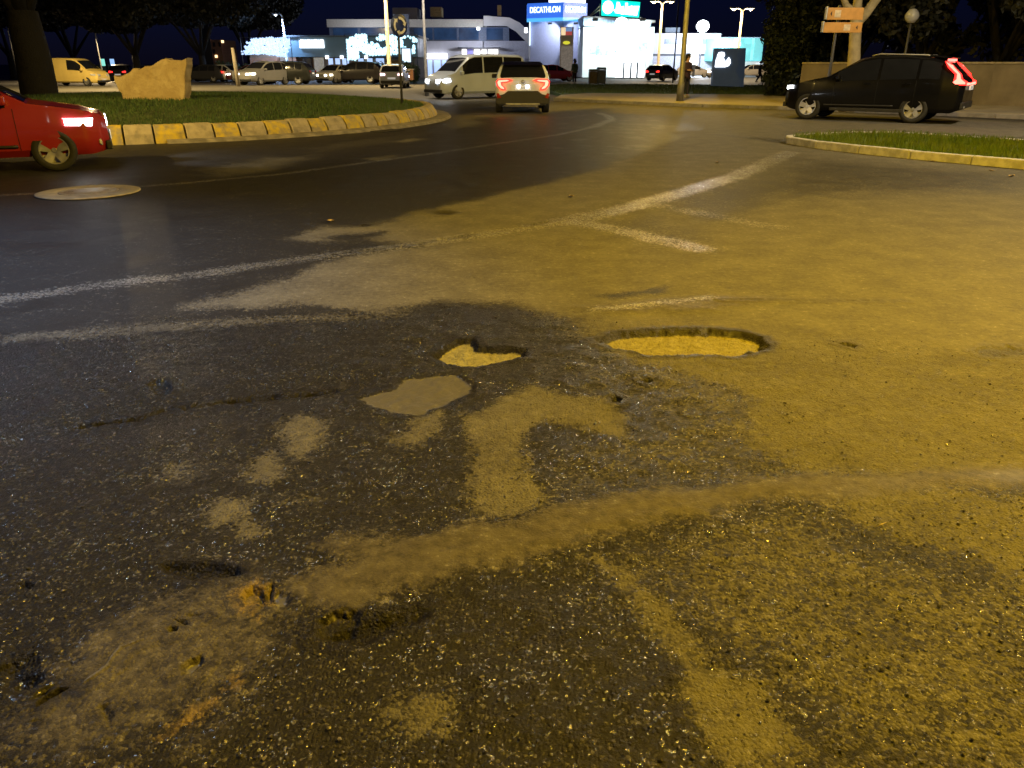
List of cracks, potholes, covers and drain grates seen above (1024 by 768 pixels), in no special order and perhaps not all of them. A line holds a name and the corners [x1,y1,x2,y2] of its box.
pothole [220,575,273,617]
pothole [140,552,265,590]
pothole [584,325,781,360]
crack [46,385,361,435]
manhole cover [34,184,141,200]
pothole [422,334,537,370]
pothole [255,578,311,621]
